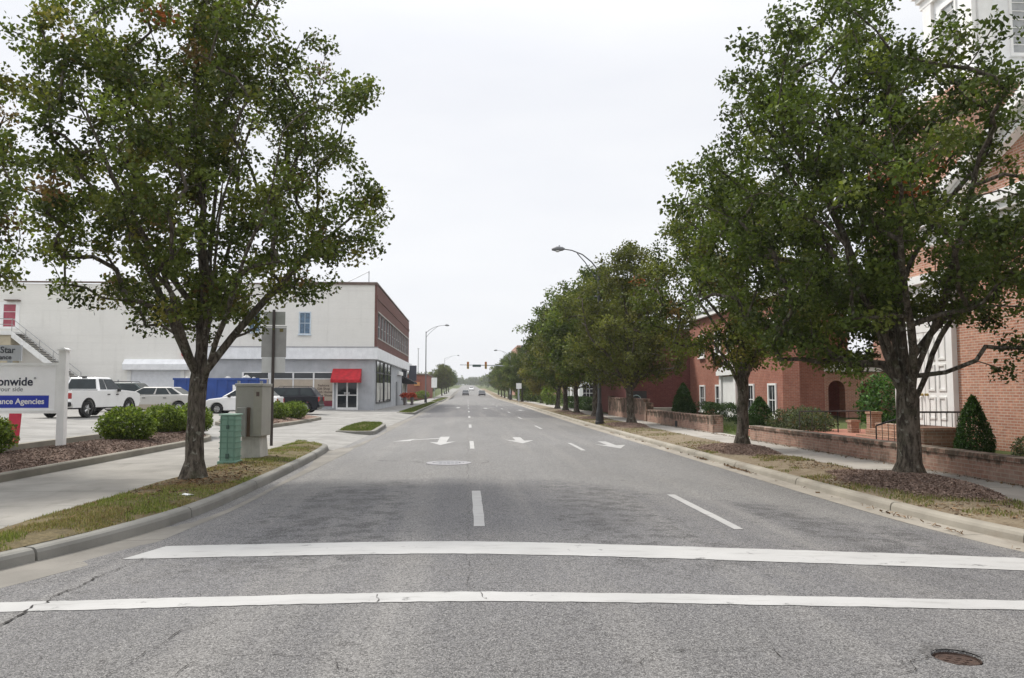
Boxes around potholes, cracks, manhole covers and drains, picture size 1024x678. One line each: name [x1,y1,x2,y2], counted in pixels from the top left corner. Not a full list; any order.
utility cover [933,652,982,666]
crack [0,557,143,625]
